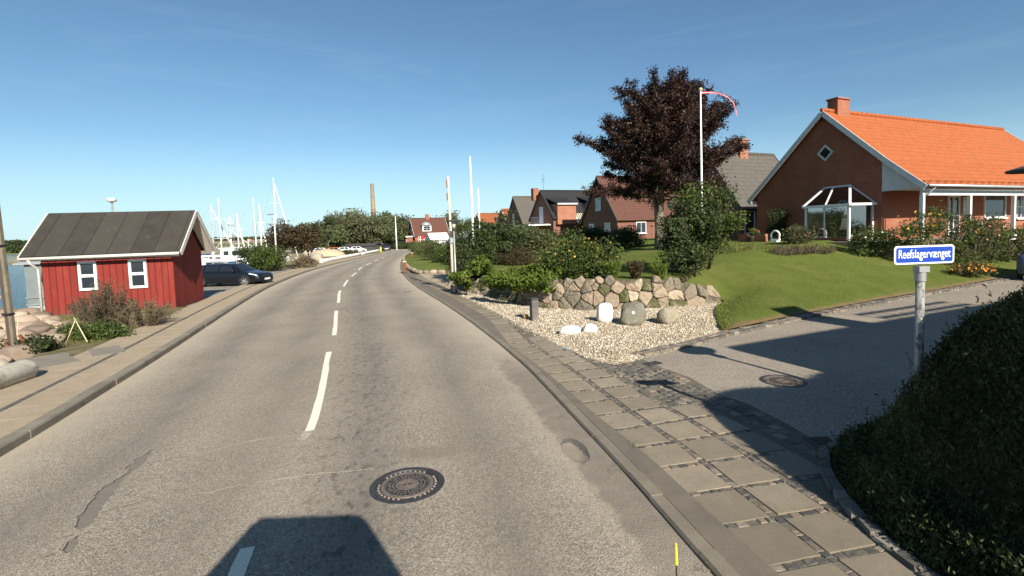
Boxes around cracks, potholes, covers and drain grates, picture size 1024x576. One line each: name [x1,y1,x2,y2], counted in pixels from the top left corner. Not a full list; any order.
pothole [560,438,590,464]
manhole cover [369,467,445,504]
manhole cover [759,375,808,387]
